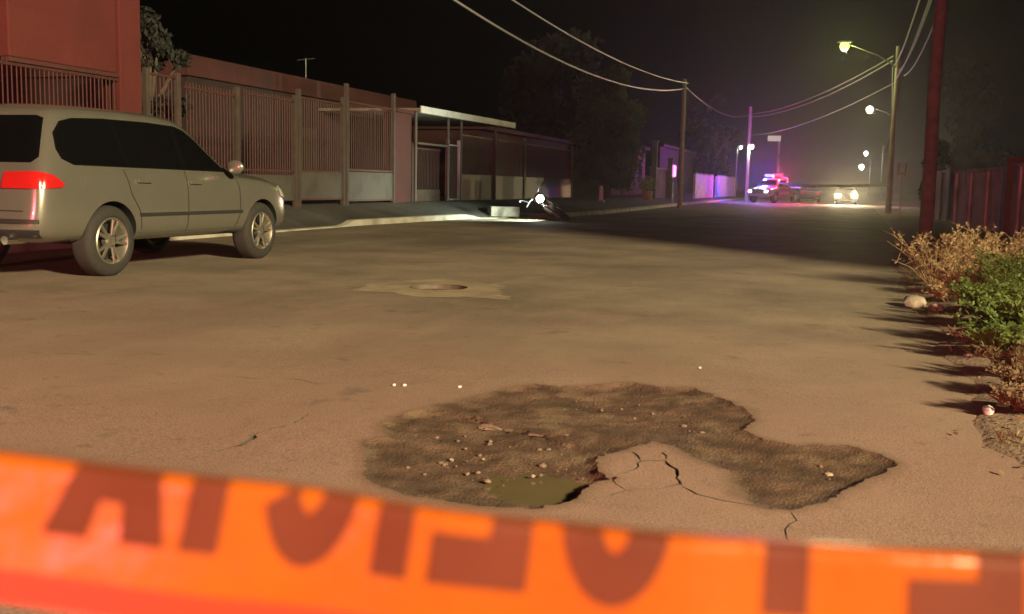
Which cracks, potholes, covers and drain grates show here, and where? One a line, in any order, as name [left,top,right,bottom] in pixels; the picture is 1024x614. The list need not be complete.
crack [161,413,309,468]
pothole [361,382,898,510]
crack [585,448,798,539]
